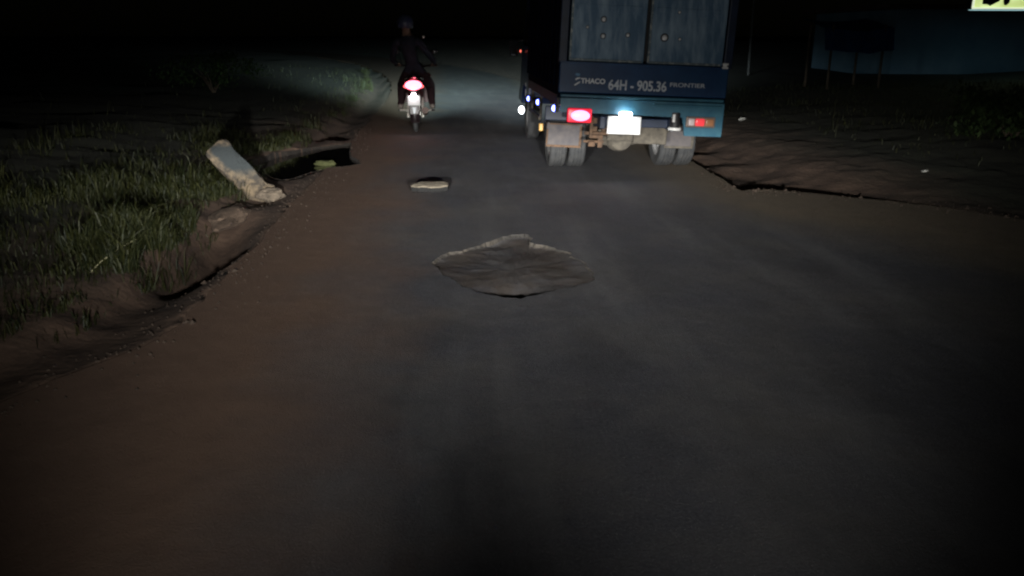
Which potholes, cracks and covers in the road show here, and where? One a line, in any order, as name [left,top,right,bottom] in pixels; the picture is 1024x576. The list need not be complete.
pothole [249,143,362,181]
